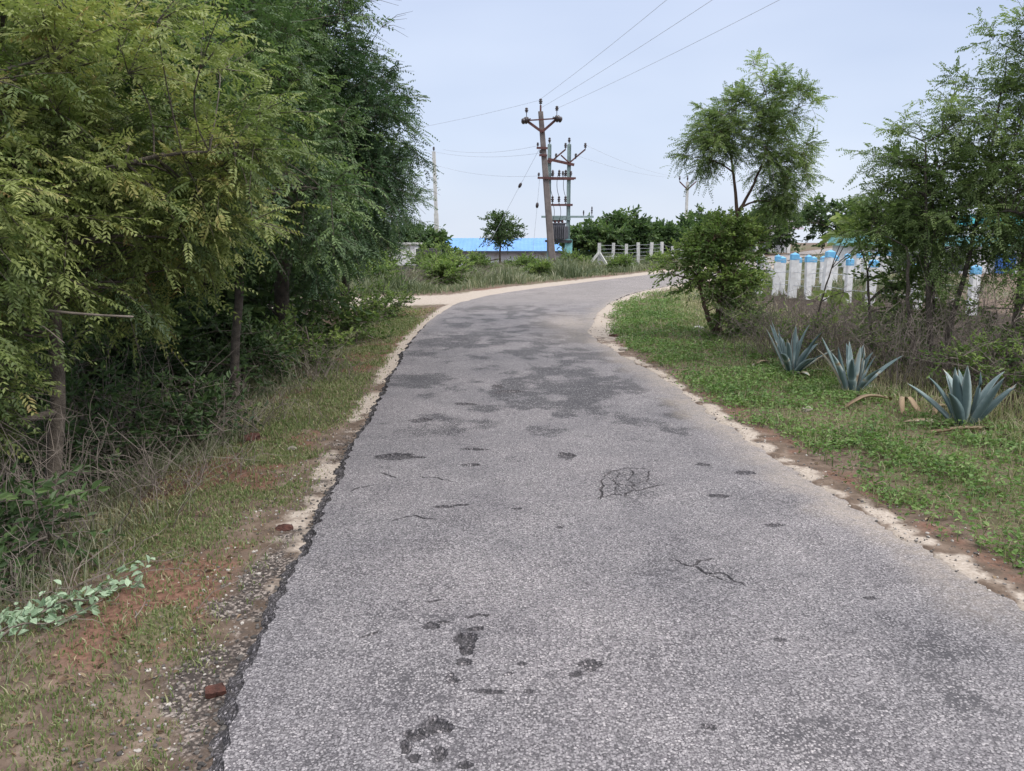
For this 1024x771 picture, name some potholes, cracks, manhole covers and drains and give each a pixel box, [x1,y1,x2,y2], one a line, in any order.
crack [597,468,668,500]
pothole [400,714,455,755]
pothole [406,754,422,763]
pothole [452,626,486,656]
pothole [431,745,448,763]
crack [666,558,749,588]
pothole [455,657,475,666]
pothole [567,659,603,678]
